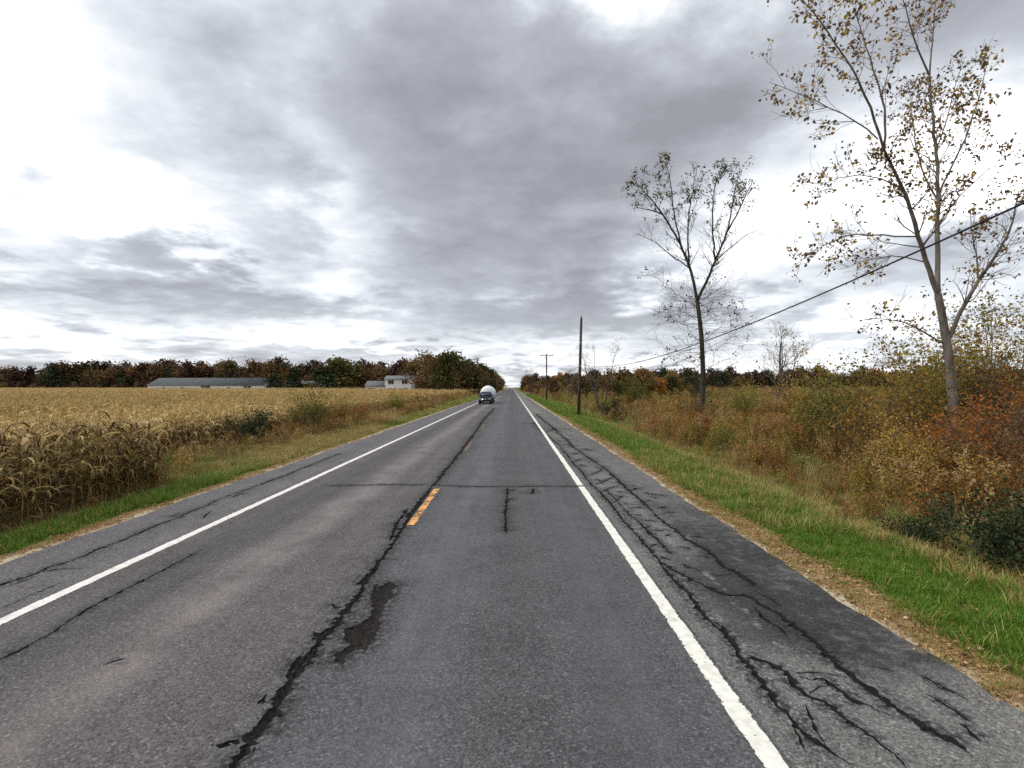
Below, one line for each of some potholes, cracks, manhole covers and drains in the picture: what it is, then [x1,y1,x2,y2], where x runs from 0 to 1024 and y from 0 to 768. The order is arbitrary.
pothole [334,581,399,665]
crack [0,408,982,768]
